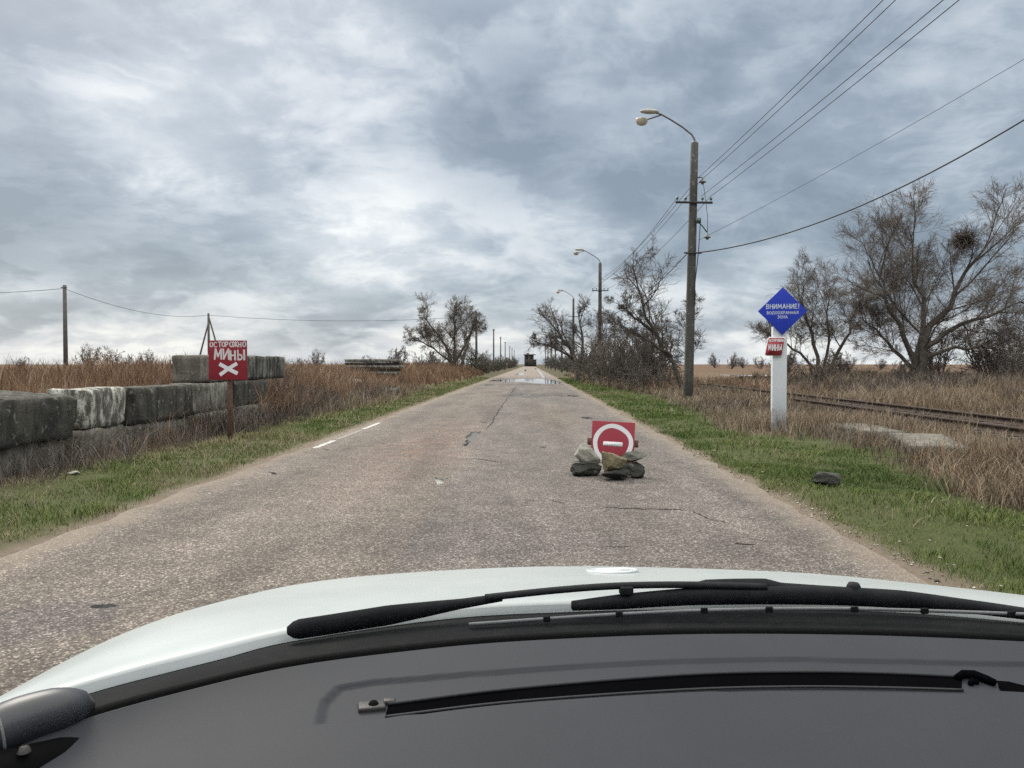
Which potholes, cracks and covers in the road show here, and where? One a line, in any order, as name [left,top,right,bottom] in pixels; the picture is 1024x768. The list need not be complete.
crack [606,507,728,523]
pothole [463,431,482,446]
